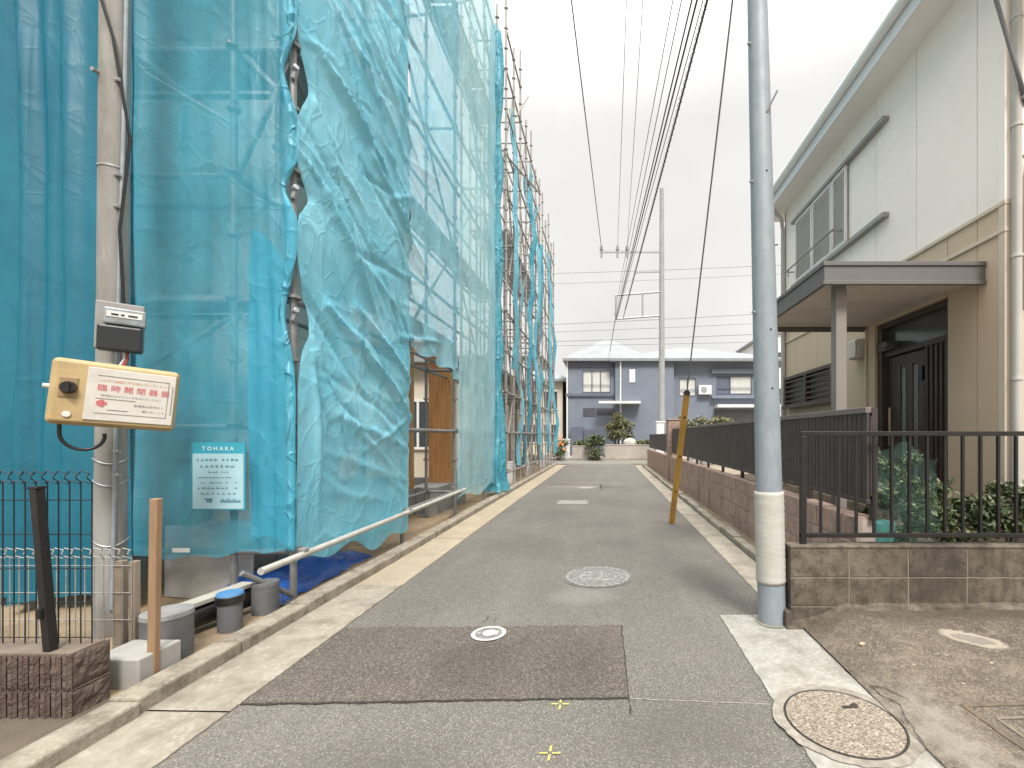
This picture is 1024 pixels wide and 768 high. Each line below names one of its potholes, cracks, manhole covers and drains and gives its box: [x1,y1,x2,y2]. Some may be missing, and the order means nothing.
manhole cover [772,684,926,768]
manhole cover [562,566,633,588]
utility cover [471,626,506,641]
